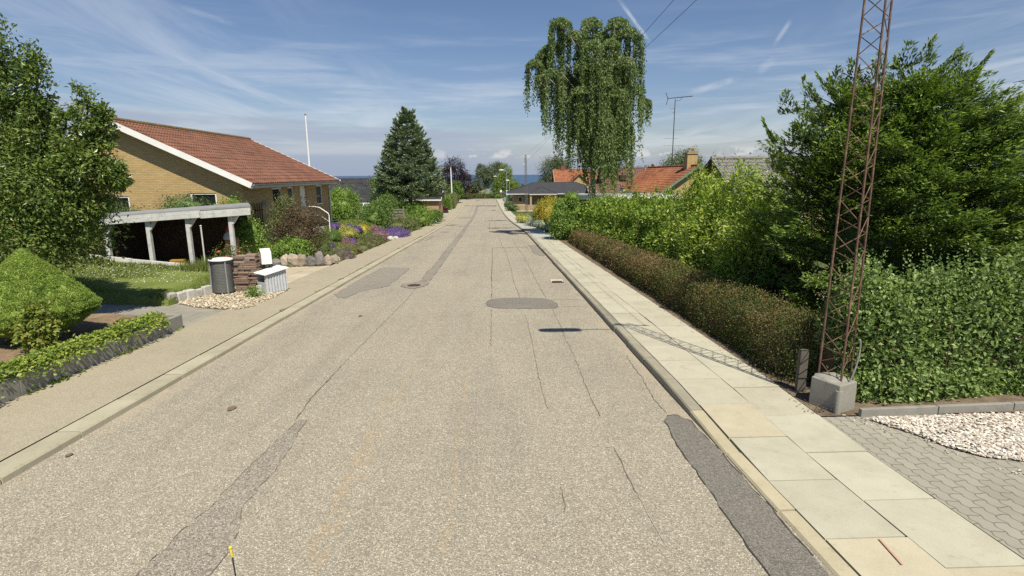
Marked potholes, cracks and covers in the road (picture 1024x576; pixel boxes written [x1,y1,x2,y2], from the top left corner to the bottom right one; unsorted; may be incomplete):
crack [554,299,600,416]
crack [296,290,415,419]
crack [467,205,545,346]
crack [600,446,666,544]
